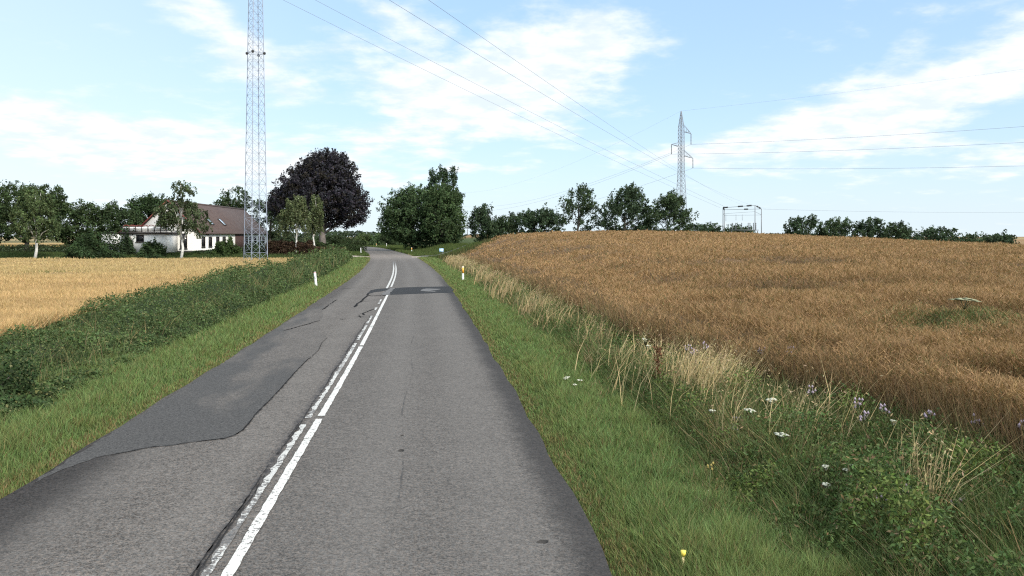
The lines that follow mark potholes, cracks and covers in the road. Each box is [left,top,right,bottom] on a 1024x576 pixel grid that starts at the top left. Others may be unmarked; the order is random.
crack [284,288,385,331]
crack [389,305,416,545]
